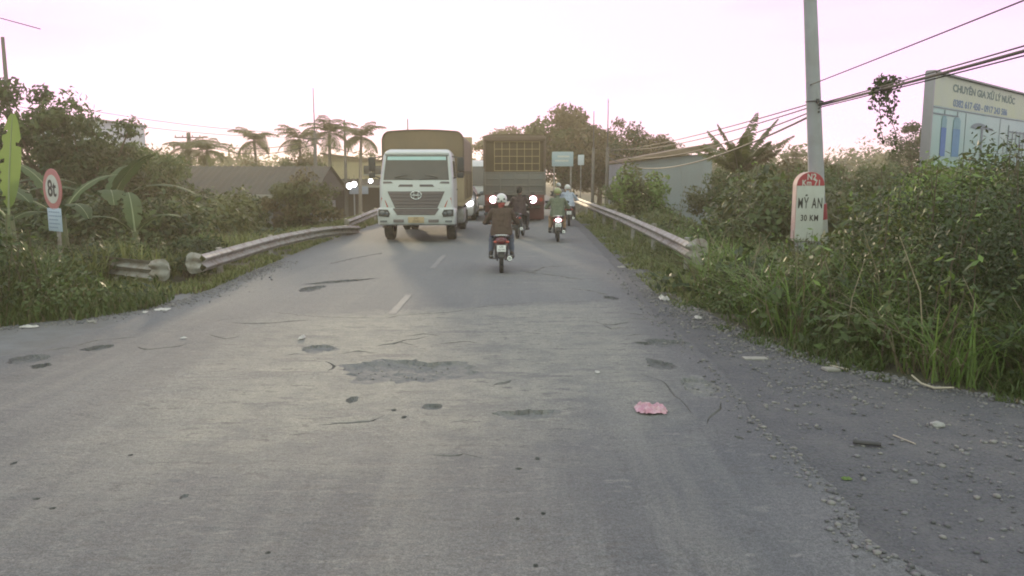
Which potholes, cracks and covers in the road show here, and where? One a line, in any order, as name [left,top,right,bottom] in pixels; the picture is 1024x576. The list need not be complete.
pothole [632,338,691,347]
crack [293,415,384,435]
pothole [491,409,564,420]
pothole [645,358,678,370]
crack [707,401,722,425]
crack [290,333,475,375]
pothole [301,344,340,354]
crack [330,253,382,264]
crack [40,337,191,352]
pothole [4,354,52,365]
